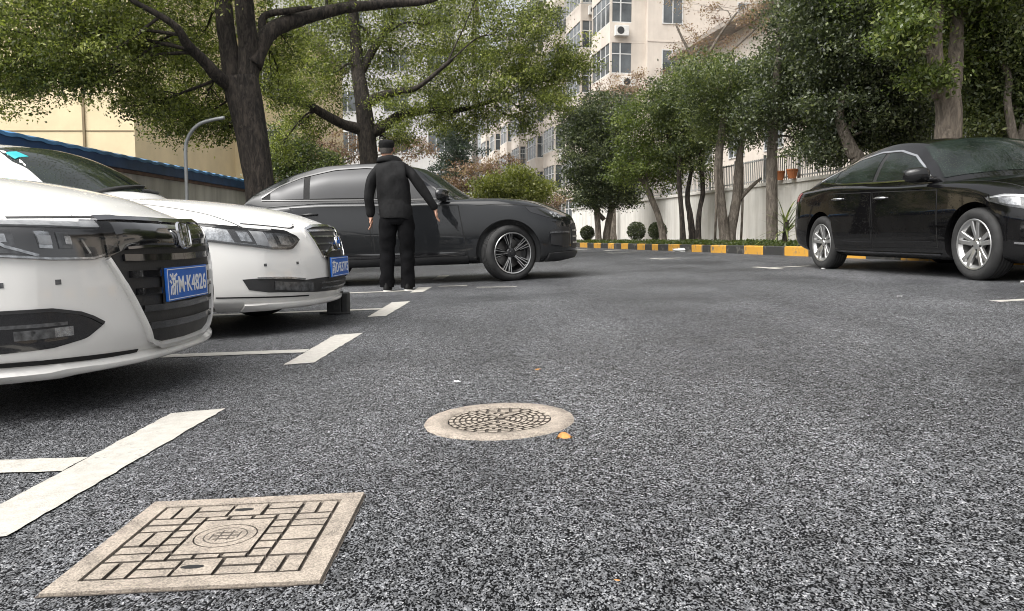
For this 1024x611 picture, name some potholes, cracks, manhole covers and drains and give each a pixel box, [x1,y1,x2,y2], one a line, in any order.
manhole cover [424,403,574,441]
manhole cover [34,492,366,598]
